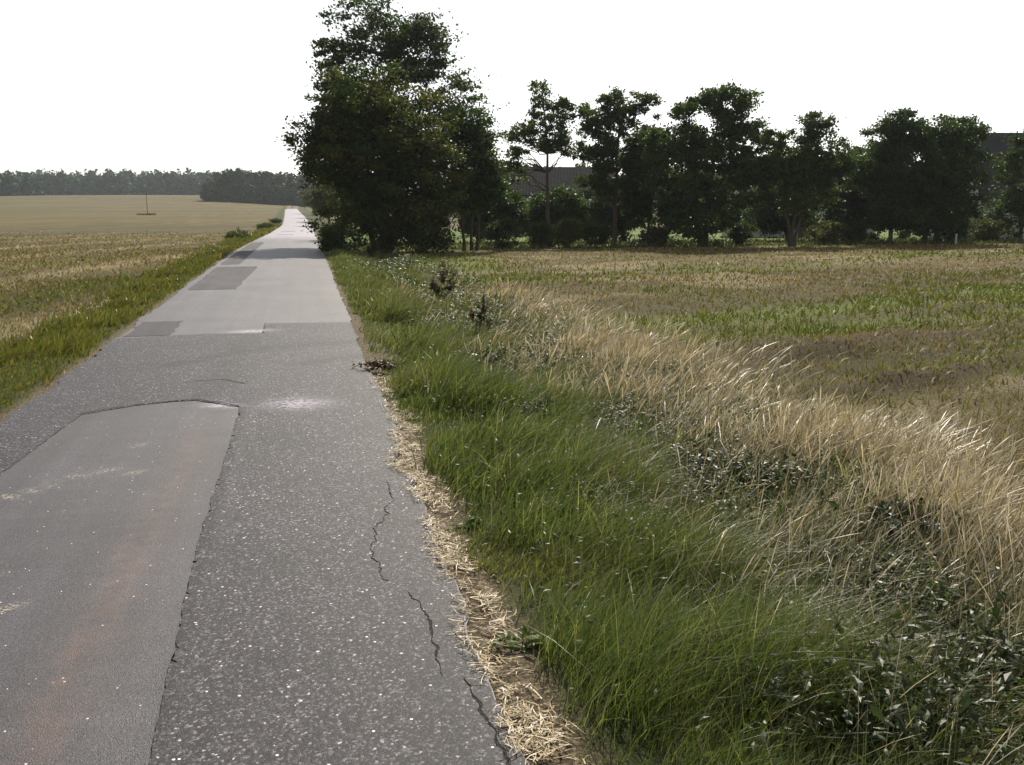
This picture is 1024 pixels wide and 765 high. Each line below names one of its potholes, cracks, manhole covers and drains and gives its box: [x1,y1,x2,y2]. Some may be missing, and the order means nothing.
crack [464,678,511,765]
crack [408,592,443,676]
crack [370,481,394,581]
